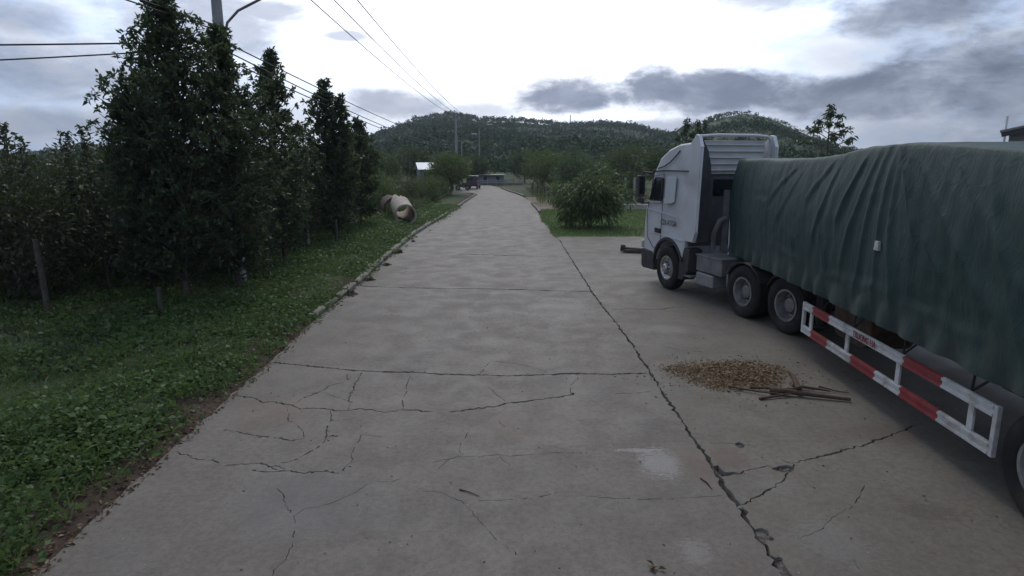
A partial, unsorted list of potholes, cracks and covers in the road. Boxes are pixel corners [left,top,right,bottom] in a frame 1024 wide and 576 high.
crack [265,241,920,569]
crack [176,373,431,576]
